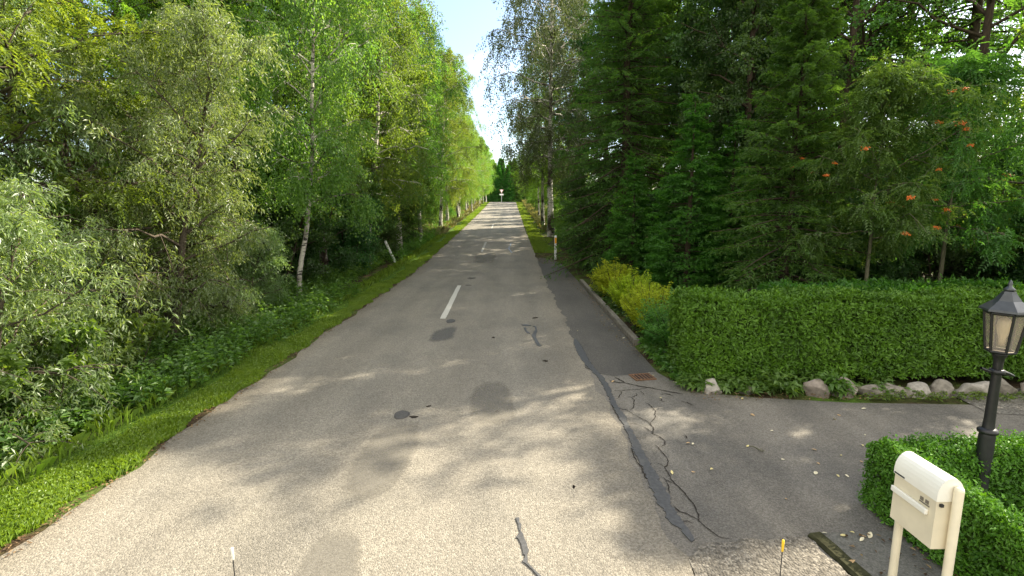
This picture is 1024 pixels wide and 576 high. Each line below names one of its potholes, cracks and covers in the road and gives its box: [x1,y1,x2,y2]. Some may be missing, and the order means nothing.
crack [612,377,730,539]
drain grate [629,373,657,381]
